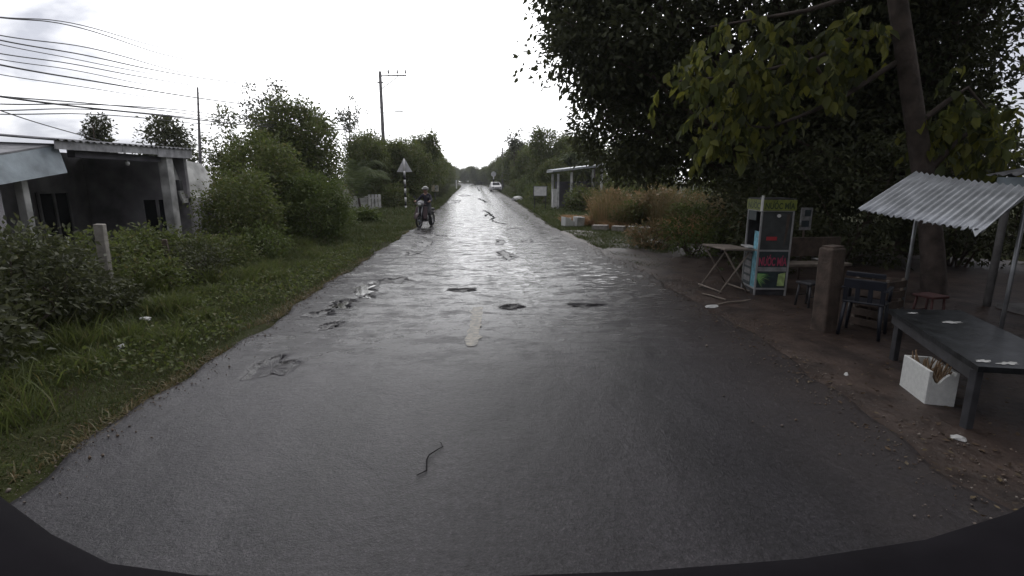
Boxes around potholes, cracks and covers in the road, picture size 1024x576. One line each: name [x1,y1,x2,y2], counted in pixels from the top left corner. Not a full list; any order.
pothole [326,298,359,310]
crack [475,186,505,224]
pothole [496,249,519,261]
pothole [300,308,337,319]
pothole [239,353,303,381]
pothole [317,320,344,331]
pothole [347,282,379,298]
